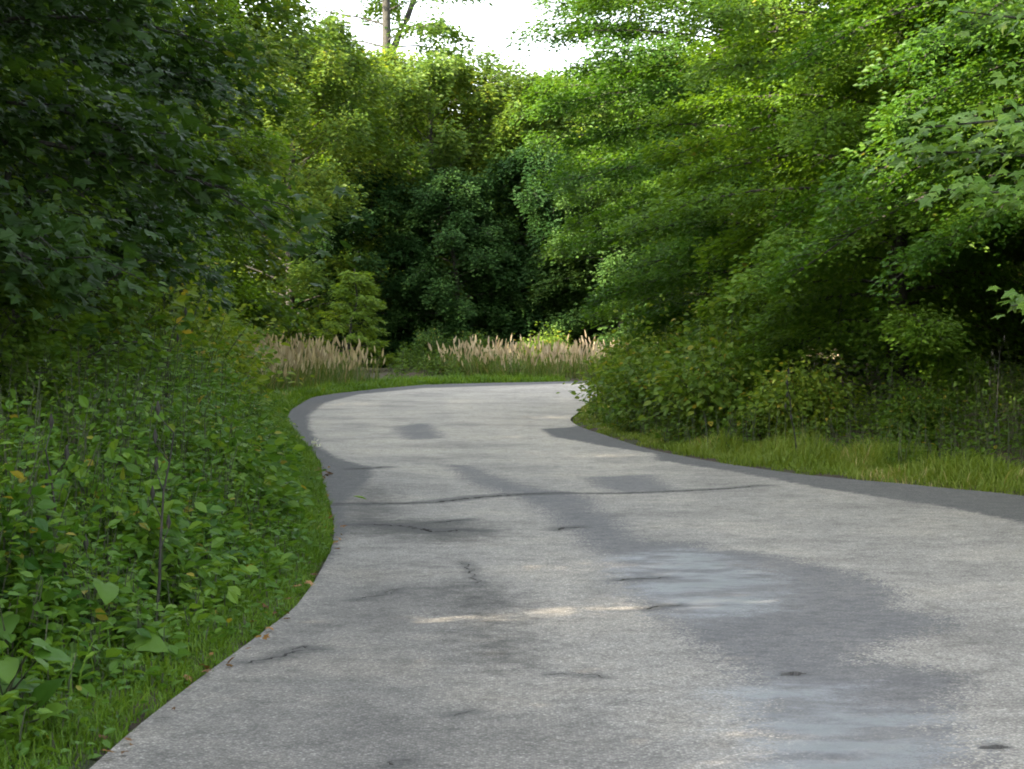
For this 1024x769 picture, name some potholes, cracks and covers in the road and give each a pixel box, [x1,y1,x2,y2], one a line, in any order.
crack [359,520,478,532]
crack [346,485,757,504]
crack [461,562,483,587]
crack [355,589,398,601]
crack [245,646,317,664]
